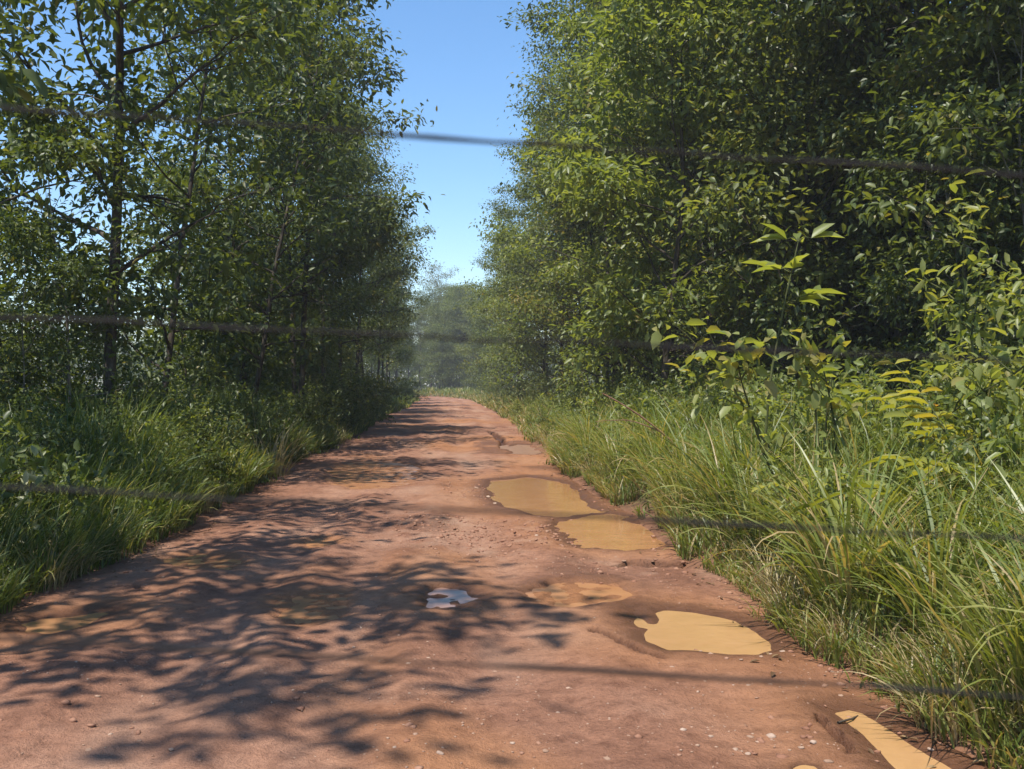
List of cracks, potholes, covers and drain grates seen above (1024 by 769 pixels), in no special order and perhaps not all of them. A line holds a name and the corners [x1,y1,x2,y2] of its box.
pothole [809,696,985,769]
pothole [469,474,637,521]
pothole [546,512,676,554]
pothole [496,571,671,618]
pothole [607,598,799,655]
pothole [488,443,548,455]
